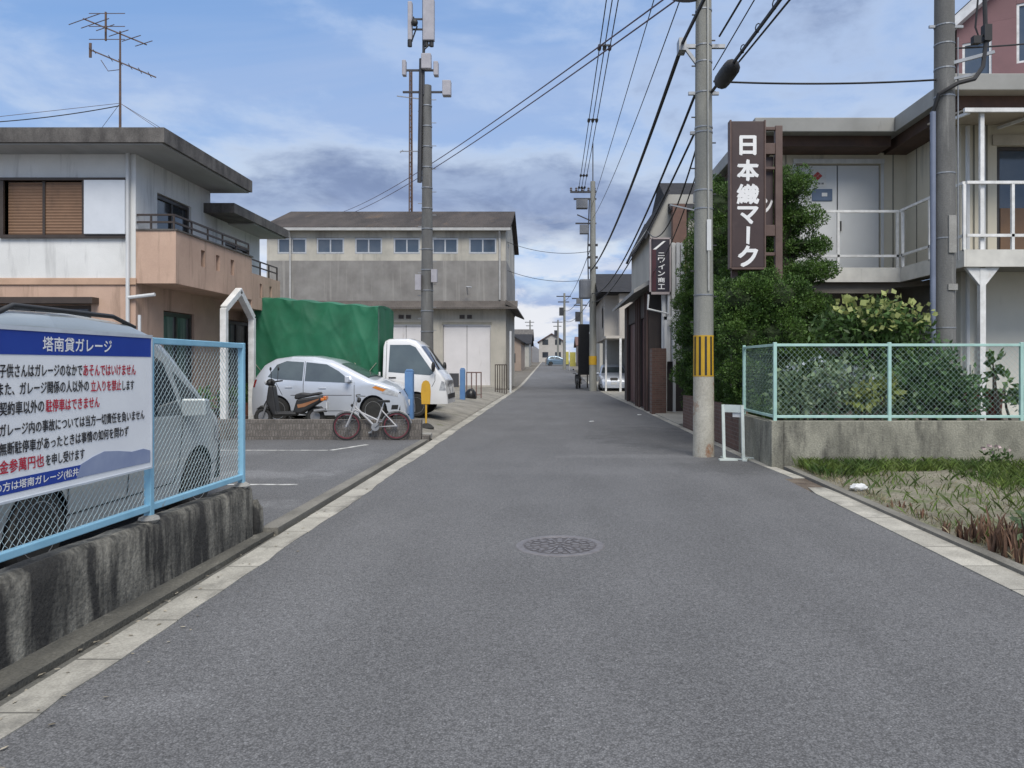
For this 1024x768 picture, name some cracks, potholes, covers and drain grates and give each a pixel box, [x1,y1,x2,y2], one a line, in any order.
manhole cover [515,535,605,557]
